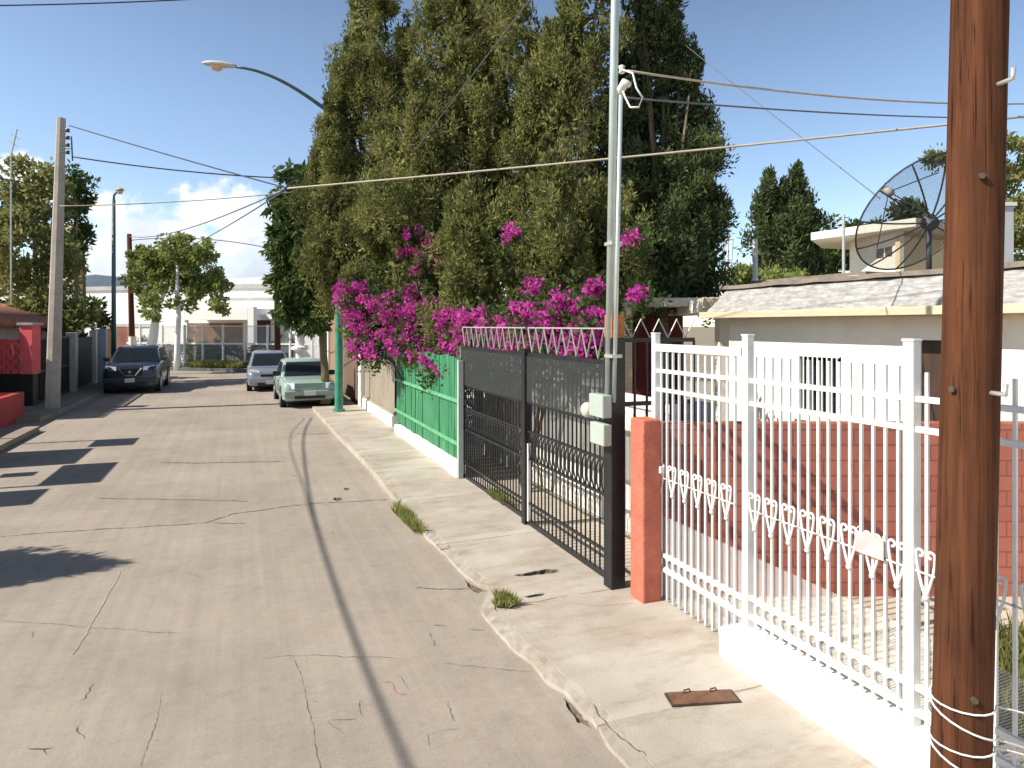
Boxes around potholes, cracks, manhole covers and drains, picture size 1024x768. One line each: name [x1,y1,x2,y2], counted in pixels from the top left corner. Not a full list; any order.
crack [9,499,387,536]
crack [266,654,409,768]
manhole cover [664,687,742,707]
